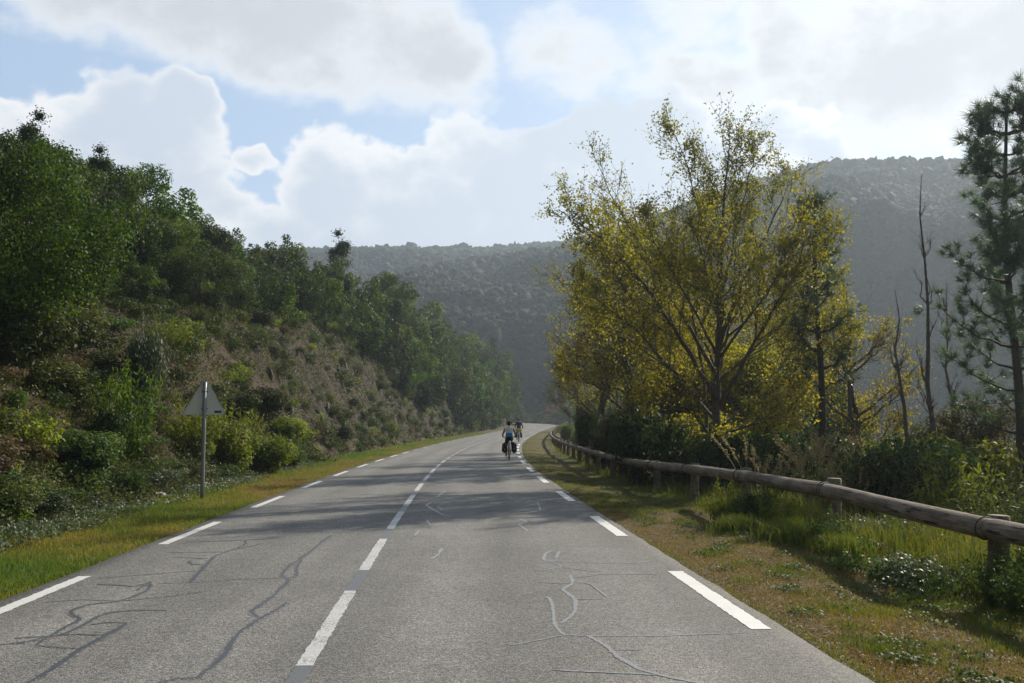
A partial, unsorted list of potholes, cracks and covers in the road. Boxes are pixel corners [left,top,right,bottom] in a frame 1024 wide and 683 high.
crack [535,546,648,577]
crack [414,519,443,559]
